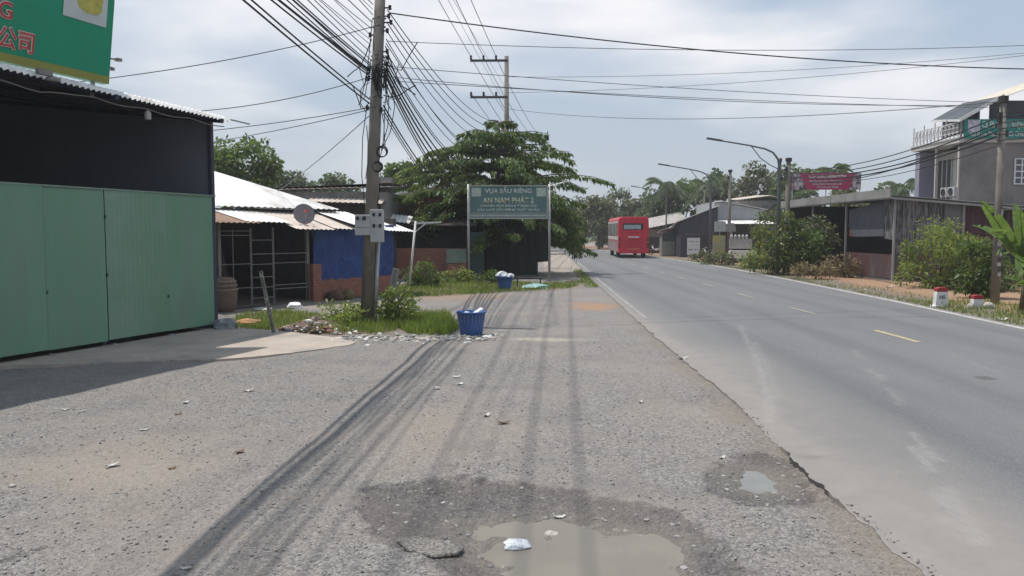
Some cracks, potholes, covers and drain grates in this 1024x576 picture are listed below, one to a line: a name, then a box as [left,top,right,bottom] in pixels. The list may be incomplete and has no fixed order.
pothole [685,448,835,515]
pothole [335,473,764,576]
